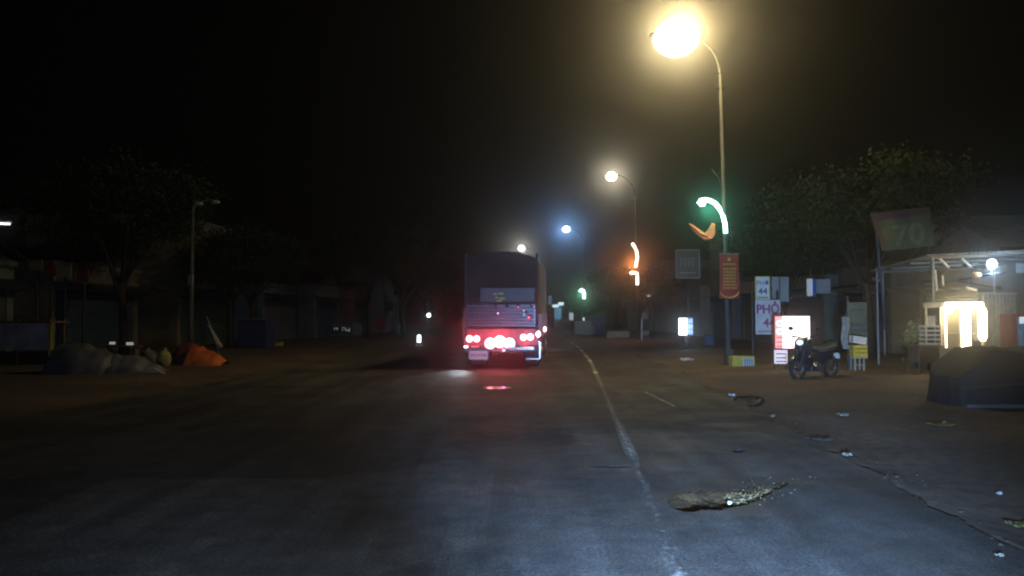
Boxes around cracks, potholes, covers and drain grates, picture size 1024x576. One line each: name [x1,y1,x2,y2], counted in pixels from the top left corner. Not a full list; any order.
pothole [733,396,765,407]
pothole [667,476,816,512]
